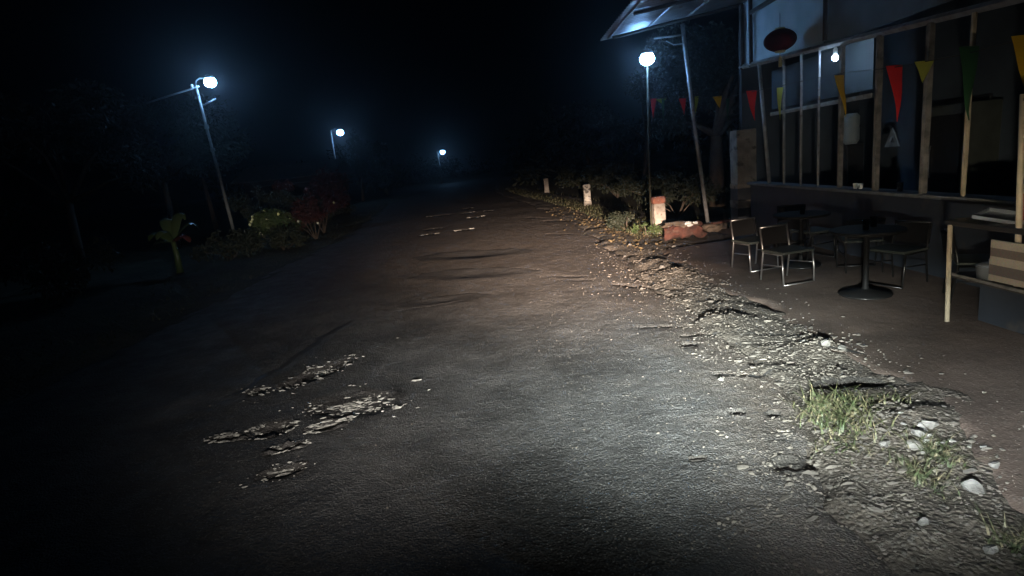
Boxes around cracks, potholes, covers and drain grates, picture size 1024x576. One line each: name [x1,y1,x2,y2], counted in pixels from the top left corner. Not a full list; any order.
pothole [302,417,352,434]
pothole [203,432,249,444]
pothole [768,454,809,474]
pothole [807,376,896,391]
pothole [279,376,430,430]
pothole [243,337,398,403]
pothole [243,419,299,441]
pothole [239,461,316,488]
pothole [261,439,311,456]
